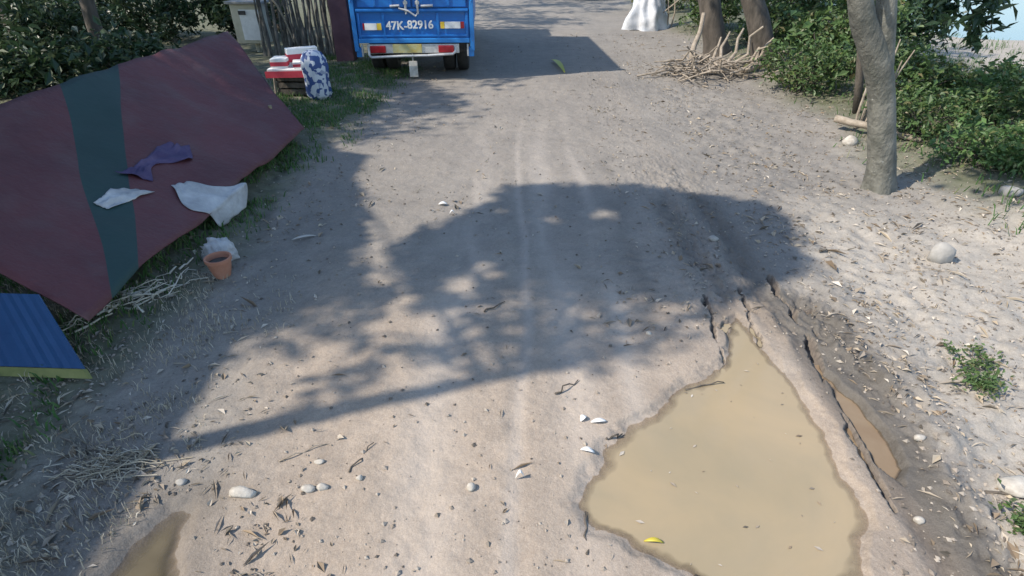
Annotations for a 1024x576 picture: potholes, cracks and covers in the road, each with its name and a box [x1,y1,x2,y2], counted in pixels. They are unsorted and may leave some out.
pothole [92,496,201,576]
pothole [559,308,882,576]
pothole [812,363,911,487]
crack [701,274,896,513]
